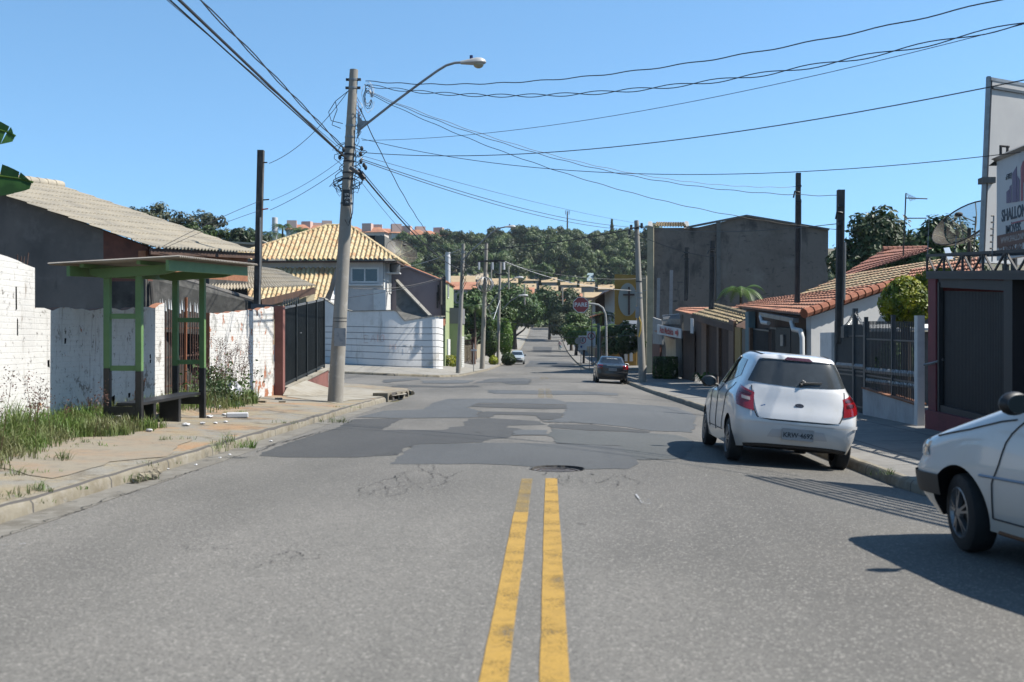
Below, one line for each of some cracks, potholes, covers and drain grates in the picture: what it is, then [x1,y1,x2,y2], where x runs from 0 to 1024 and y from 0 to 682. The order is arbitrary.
crack [358,465,459,497]
drain grate [373,390,409,402]
